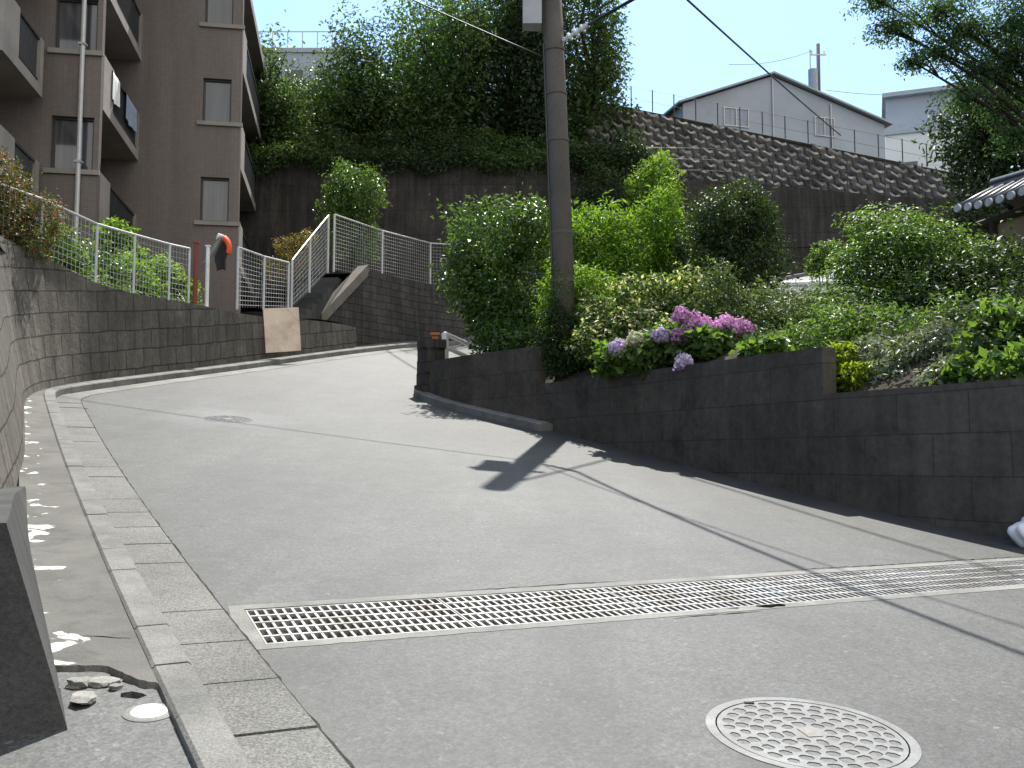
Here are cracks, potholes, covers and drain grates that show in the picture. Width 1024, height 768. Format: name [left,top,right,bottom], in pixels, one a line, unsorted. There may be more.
drain grate [742,571,931,602]
manhole cover [706,697,922,768]
pothole [120,691,147,699]
drain grate [864,564,1024,592]
drain grate [245,598,475,644]
drain grate [601,579,802,613]
drain grate [971,561,1024,578]
drain grate [437,588,651,627]
manhole cover [203,415,253,423]
